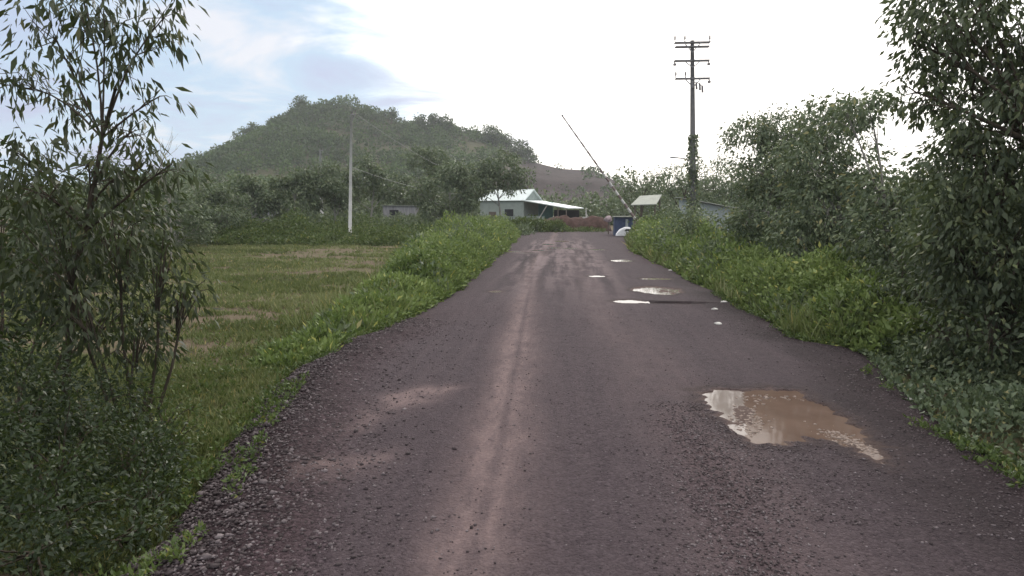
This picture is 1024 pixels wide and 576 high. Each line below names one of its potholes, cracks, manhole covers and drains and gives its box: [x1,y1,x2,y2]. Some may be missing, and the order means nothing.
pothole [697,387,896,464]
pothole [632,286,684,295]
